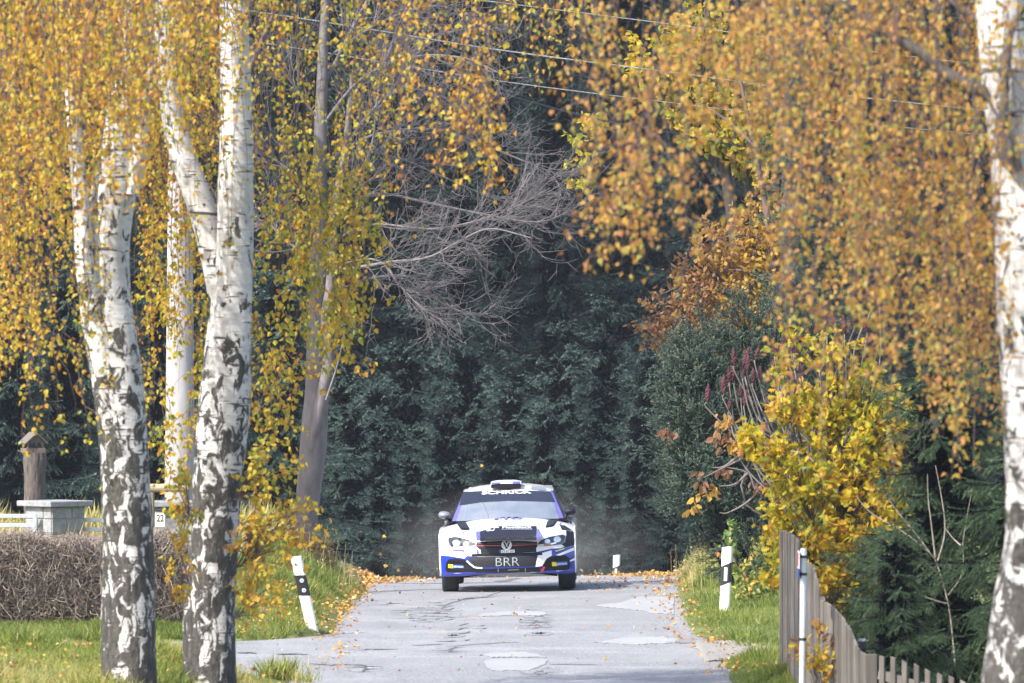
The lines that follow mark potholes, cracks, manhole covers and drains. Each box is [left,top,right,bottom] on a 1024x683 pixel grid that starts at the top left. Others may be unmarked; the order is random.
crack [381,578,556,652]
crack [279,648,385,672]
